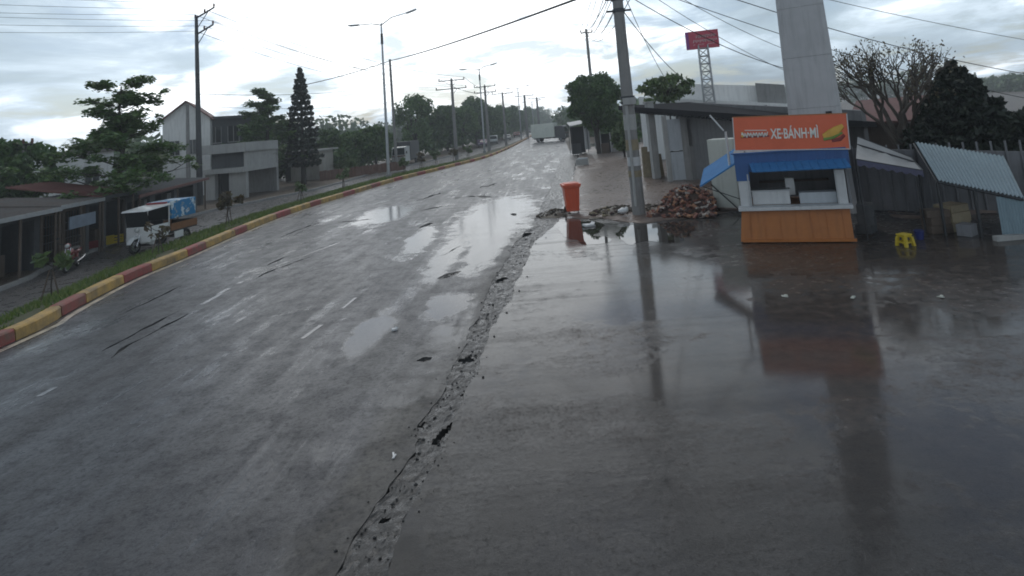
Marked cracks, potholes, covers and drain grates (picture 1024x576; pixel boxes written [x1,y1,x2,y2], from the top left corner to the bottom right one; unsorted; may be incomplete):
crack [334,150,578,576]
crack [259,256,309,277]
crack [104,287,186,357]
